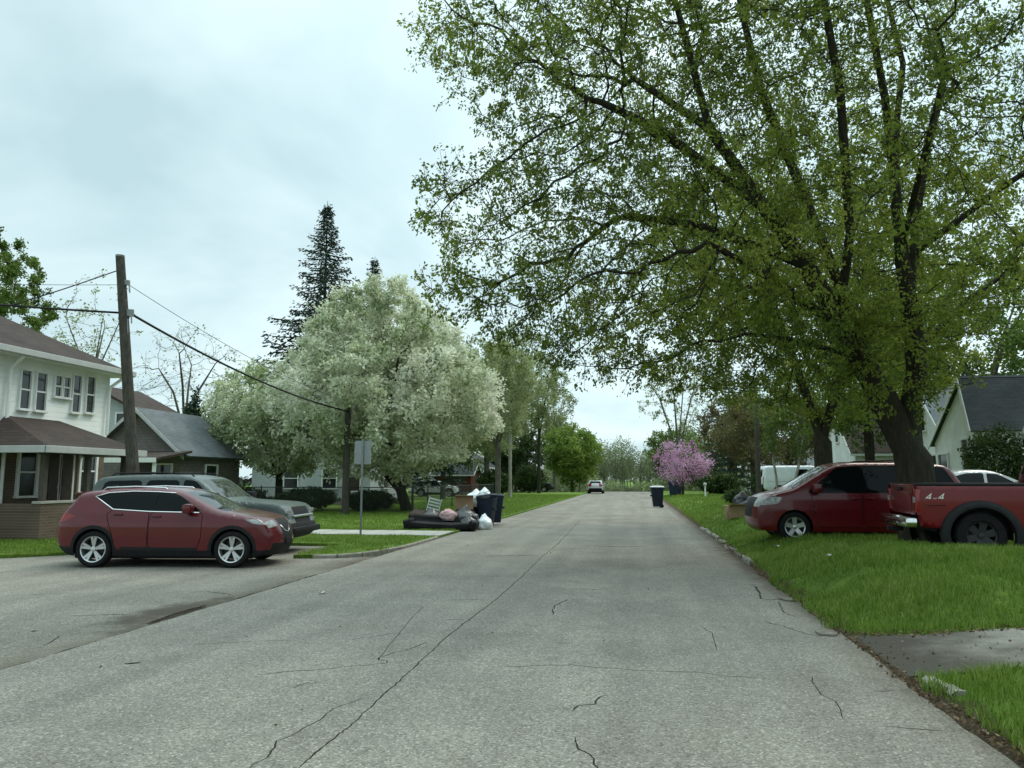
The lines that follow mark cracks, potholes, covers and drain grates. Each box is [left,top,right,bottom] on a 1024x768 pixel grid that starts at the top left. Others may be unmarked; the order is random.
crack [249,525,576,768]
crack [573,738,601,768]
crack [755,586,824,636]
